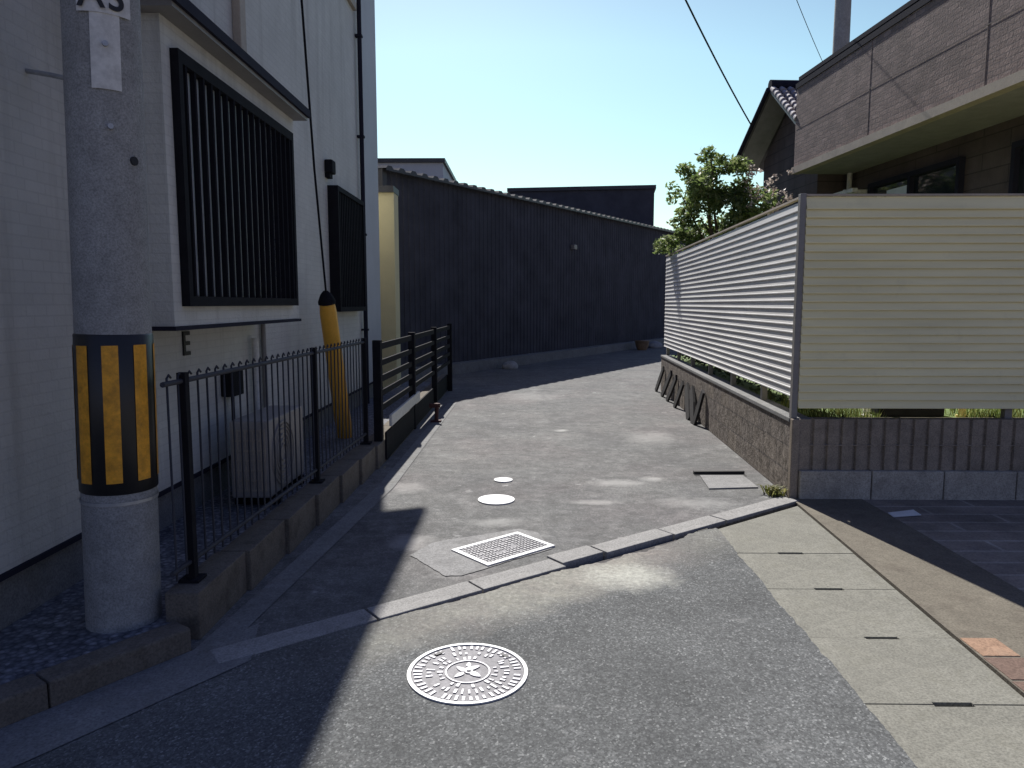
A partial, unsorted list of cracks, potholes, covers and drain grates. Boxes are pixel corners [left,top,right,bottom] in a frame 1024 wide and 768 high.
manhole cover [407,643,528,705]
